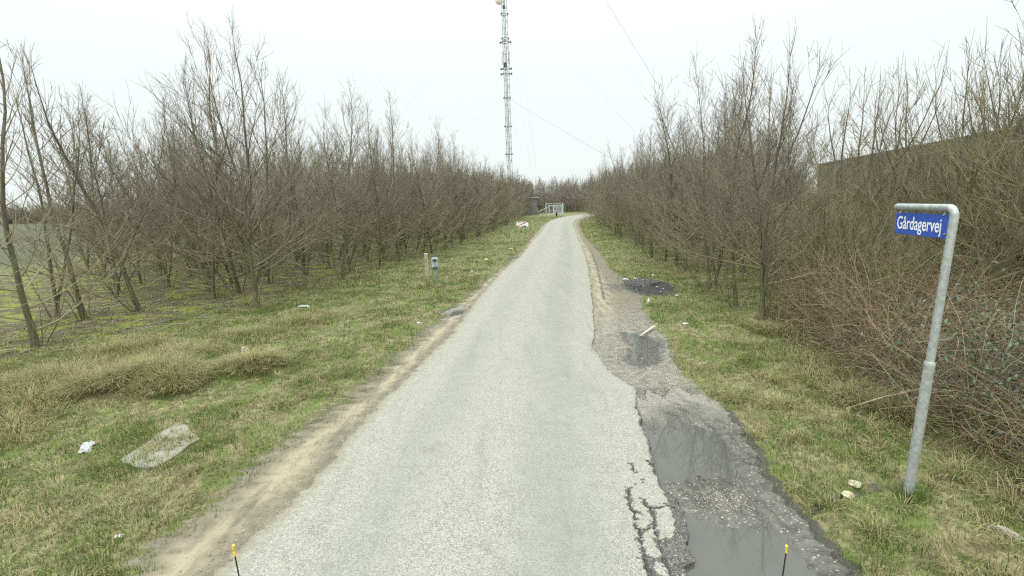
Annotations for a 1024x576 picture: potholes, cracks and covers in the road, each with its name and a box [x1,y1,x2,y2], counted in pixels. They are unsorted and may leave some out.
crack [627,488,673,576]
pothole [636,386,851,576]
pothole [617,330,673,371]
